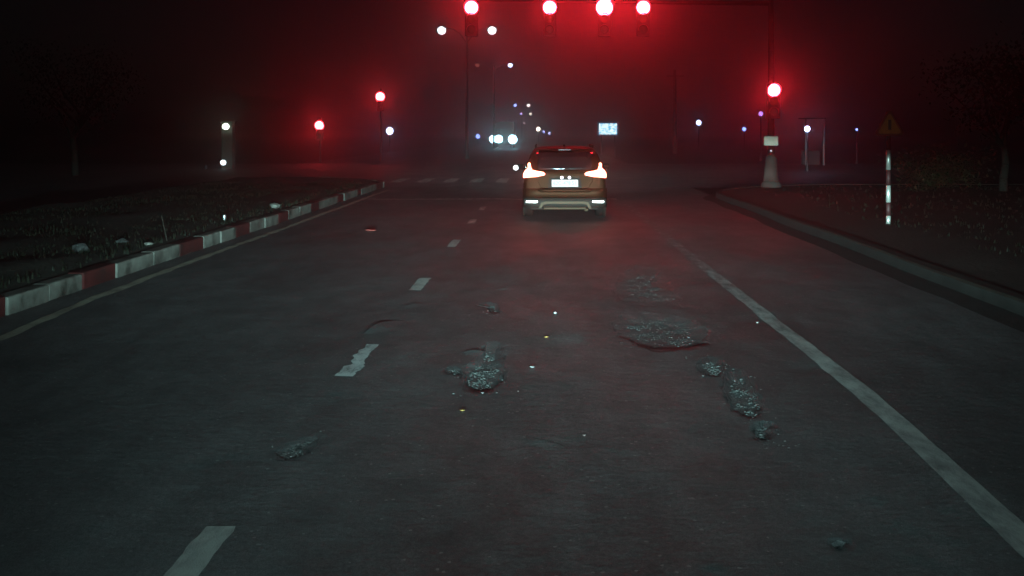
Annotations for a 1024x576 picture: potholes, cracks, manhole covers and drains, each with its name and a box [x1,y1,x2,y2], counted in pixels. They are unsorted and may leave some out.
pothole [697,356,734,378]
pothole [702,368,764,423]
pothole [452,340,508,396]
pothole [831,539,847,551]
pothole [608,264,688,312]
pothole [445,364,468,375]
pothole [605,310,720,354]
pothole [272,431,324,462]
pothole [478,302,501,316]
